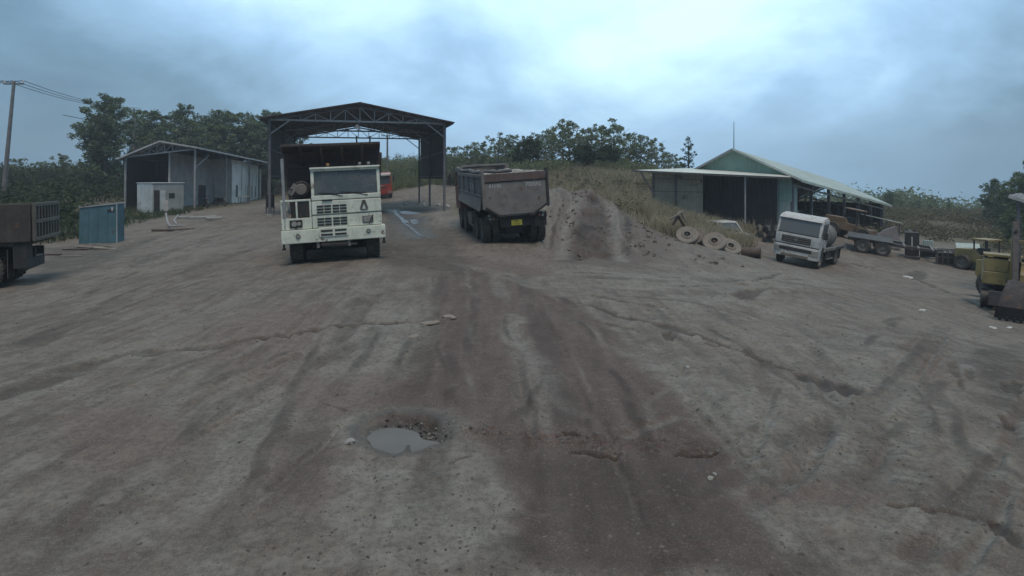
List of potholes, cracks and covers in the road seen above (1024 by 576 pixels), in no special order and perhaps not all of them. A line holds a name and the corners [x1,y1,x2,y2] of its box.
pothole [353,411,453,454]
crack [160,319,443,355]
pothole [788,370,874,398]
crack [693,332,794,371]
crack [576,284,721,333]
